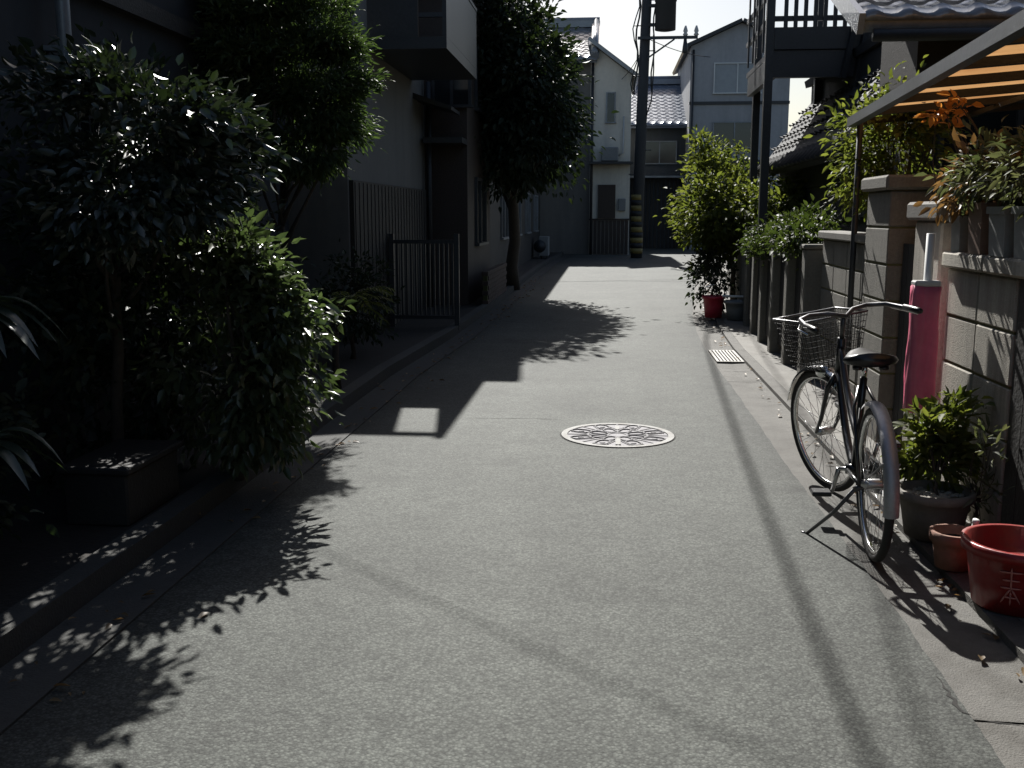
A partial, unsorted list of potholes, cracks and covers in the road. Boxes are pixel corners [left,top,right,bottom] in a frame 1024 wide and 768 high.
drain grate [708,350,745,364]
manhole cover [560,423,676,448]
